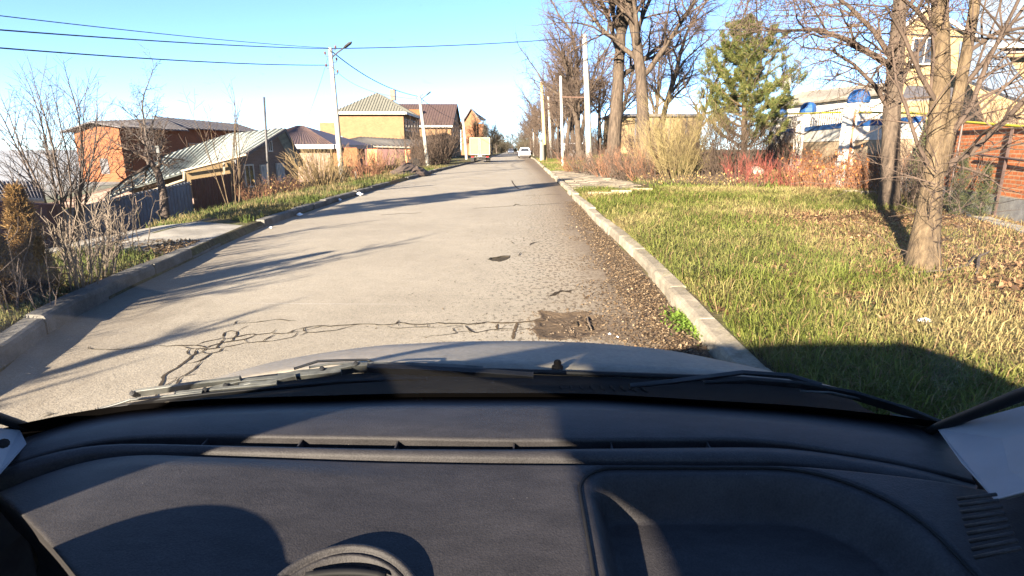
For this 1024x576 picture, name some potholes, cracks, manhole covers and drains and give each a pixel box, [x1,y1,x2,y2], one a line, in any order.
crack [88,319,543,396]
pothole [522,308,617,342]
